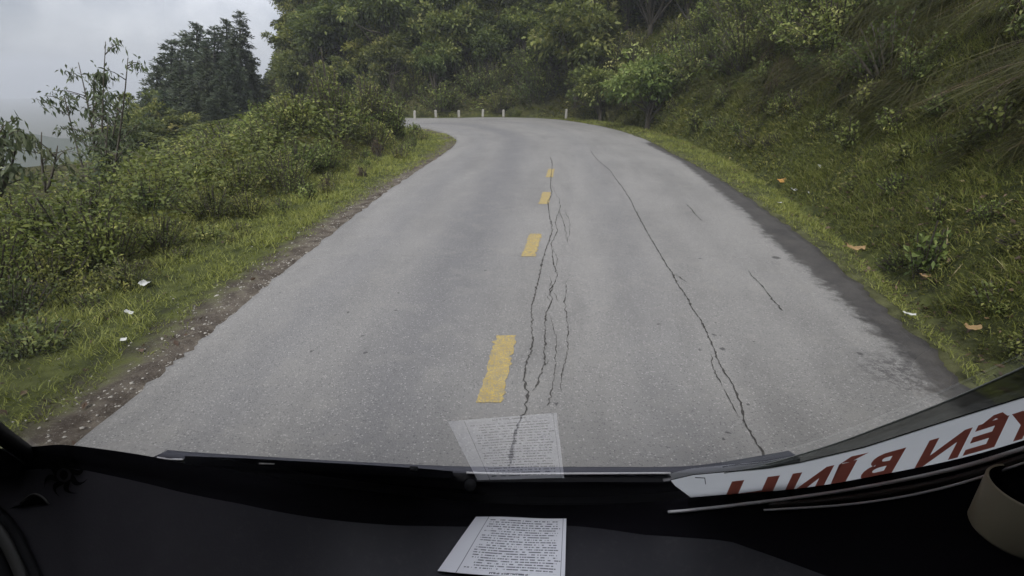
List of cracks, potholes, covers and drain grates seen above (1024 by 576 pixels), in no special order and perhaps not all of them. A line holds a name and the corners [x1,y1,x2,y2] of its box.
crack [508,157,570,467]
crack [591,151,765,455]
